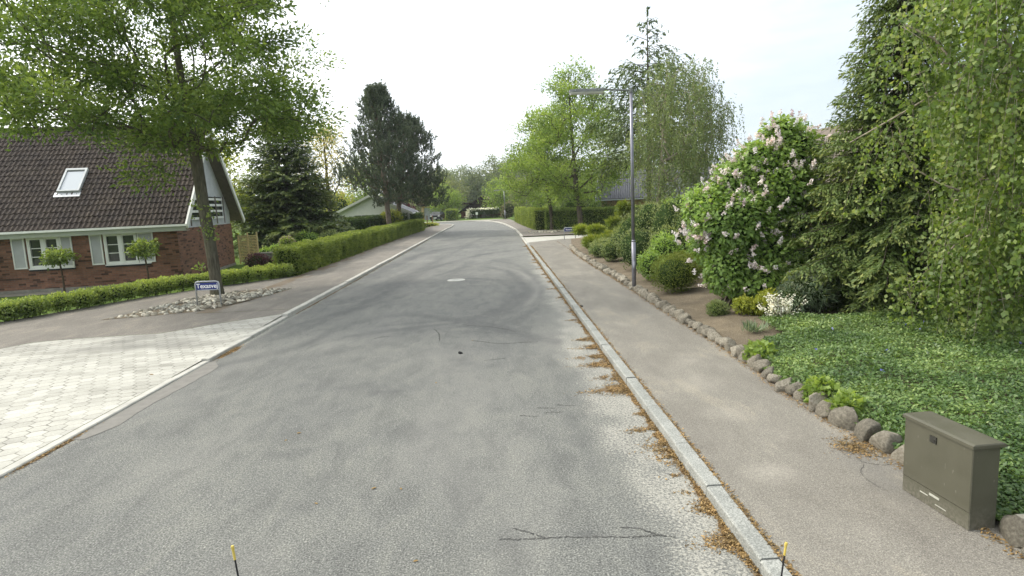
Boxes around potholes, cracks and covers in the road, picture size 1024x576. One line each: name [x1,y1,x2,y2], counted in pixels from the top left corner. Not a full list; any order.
crack [500,527,675,541]
crack [855,457,896,491]
